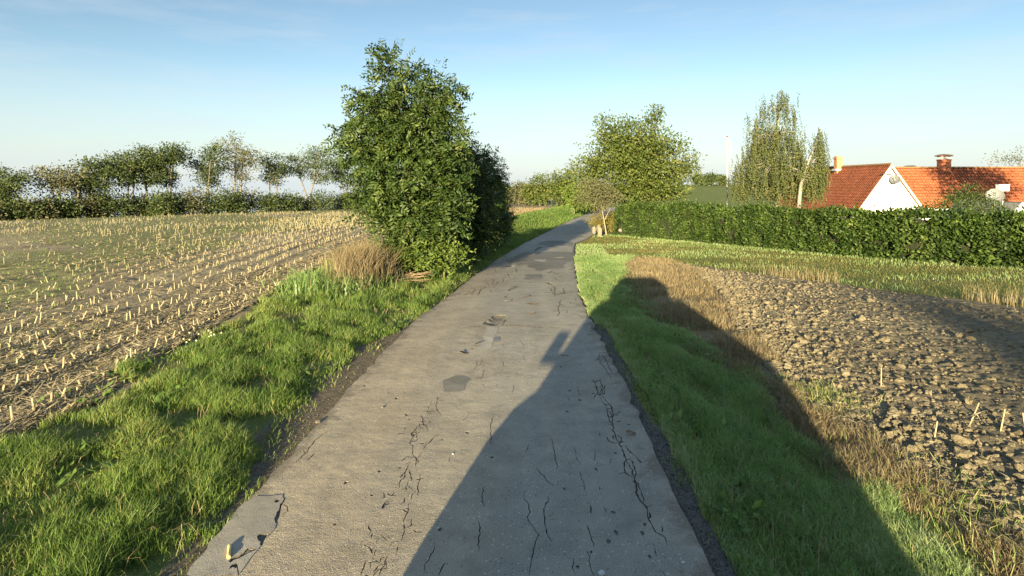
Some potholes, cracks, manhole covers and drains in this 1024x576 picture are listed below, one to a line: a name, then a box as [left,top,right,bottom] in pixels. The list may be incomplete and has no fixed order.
pothole [483,315,507,326]
crack [523,355,668,576]
crack [361,397,450,576]
